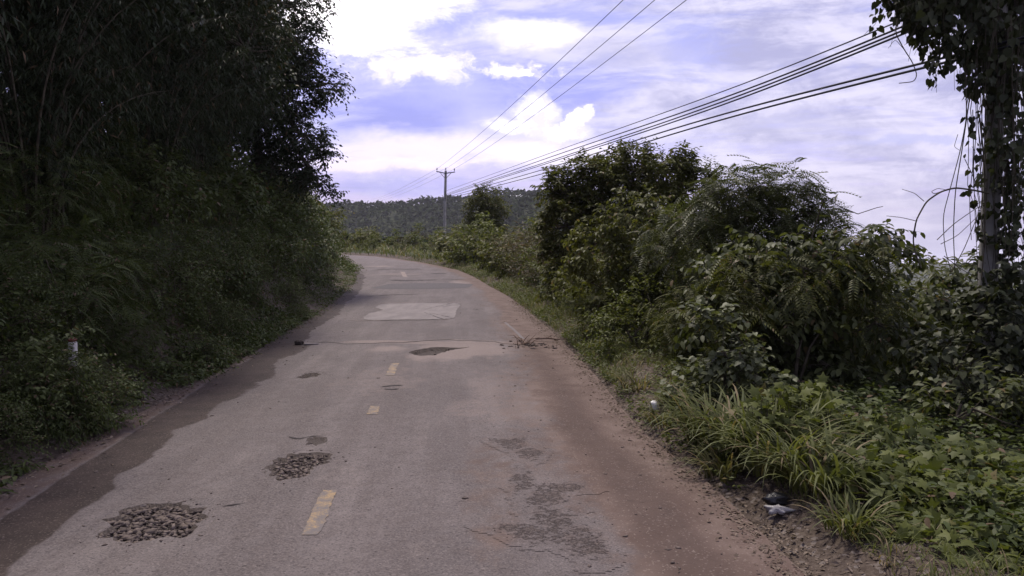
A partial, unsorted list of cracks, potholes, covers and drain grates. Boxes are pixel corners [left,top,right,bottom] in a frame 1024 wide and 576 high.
pothole [80,499,236,549]
pothole [292,372,327,380]
pothole [298,434,335,448]
pothole [256,449,350,484]
pothole [405,347,471,357]
